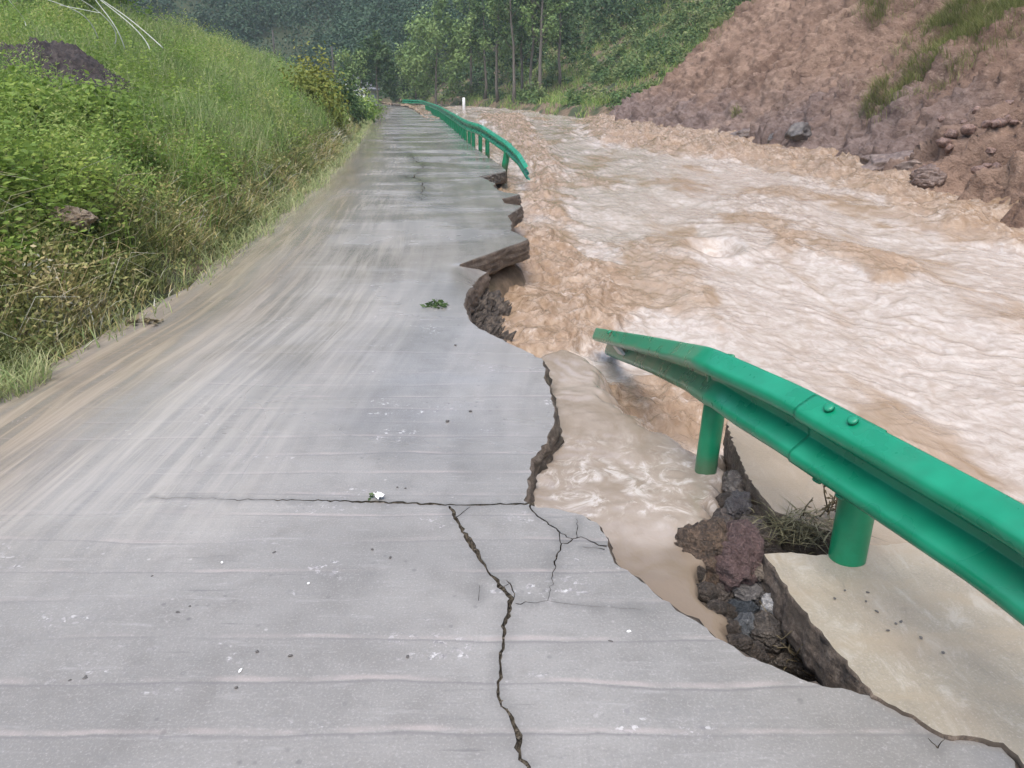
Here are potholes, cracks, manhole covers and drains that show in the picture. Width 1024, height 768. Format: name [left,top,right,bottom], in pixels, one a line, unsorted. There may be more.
crack [236,500,607,768]
